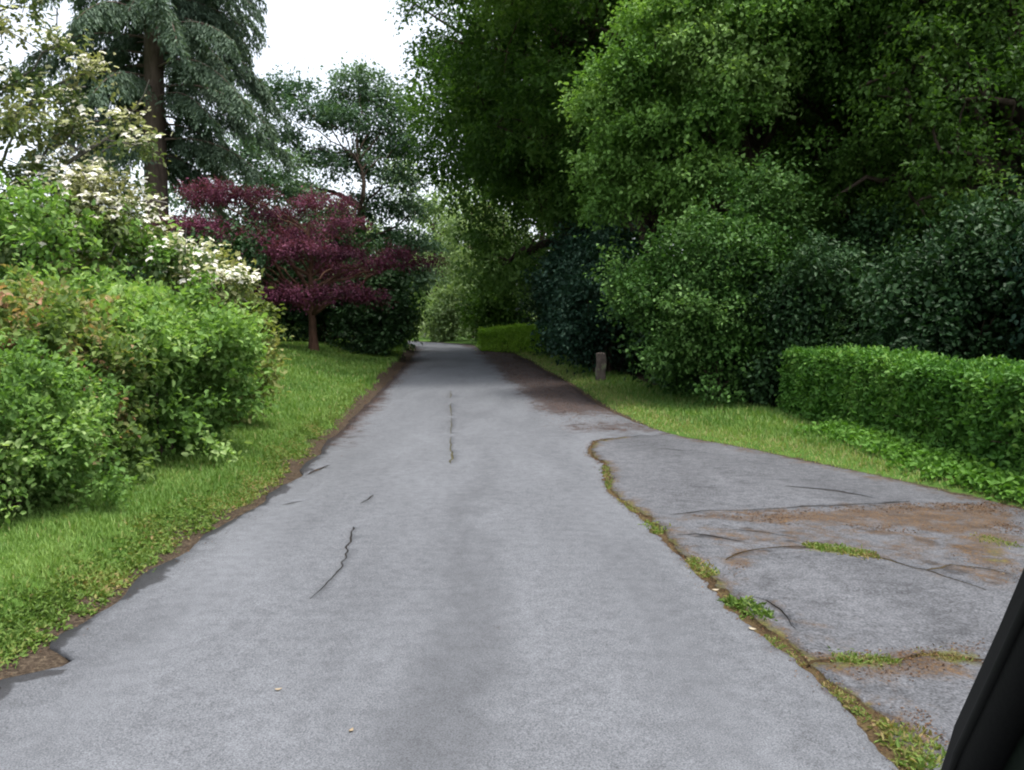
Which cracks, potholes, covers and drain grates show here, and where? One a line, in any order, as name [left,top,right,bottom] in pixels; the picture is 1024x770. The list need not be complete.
crack [587,437,1005,770]
crack [310,527,355,599]
